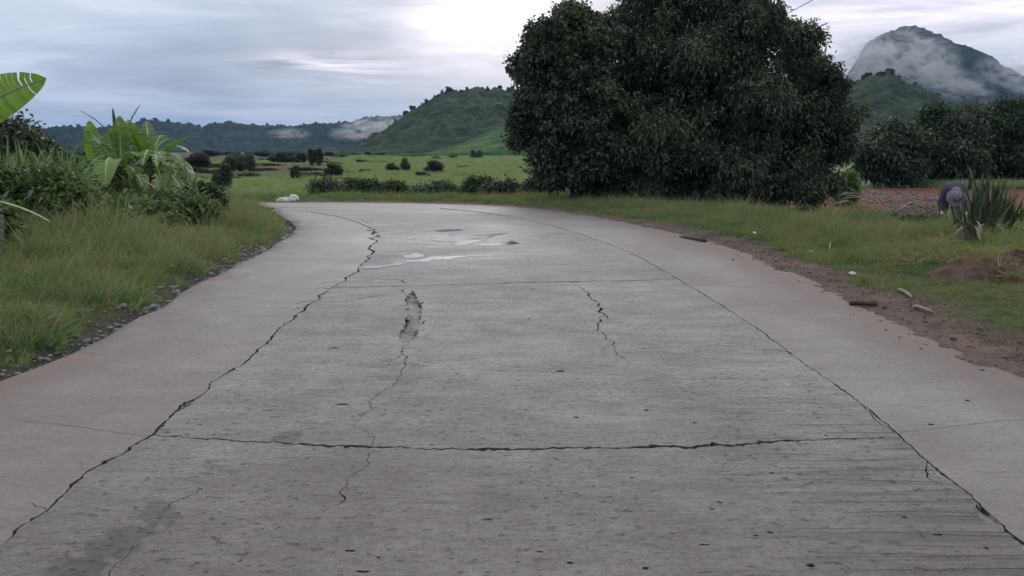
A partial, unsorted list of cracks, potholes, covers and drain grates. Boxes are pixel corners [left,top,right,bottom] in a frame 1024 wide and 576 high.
pothole [398,290,425,343]
crack [1,228,412,546]
crack [574,284,629,364]
